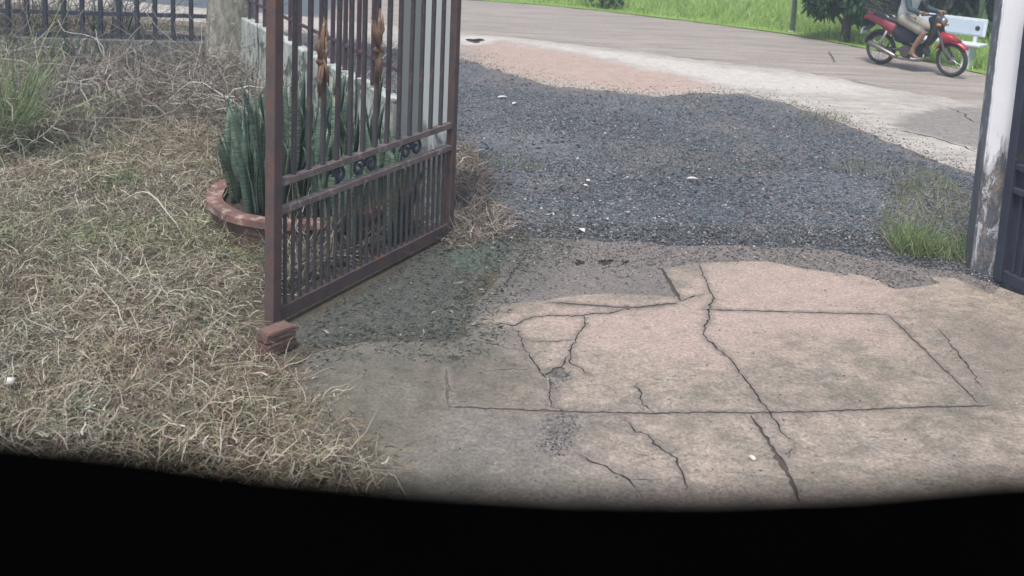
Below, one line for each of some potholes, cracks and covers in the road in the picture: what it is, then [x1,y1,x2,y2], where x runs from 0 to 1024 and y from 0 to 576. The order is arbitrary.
crack [578,386,688,493]
crack [682,266,793,458]
crack [473,308,629,408]
pothole [545,367,570,378]
crack [938,329,979,384]
